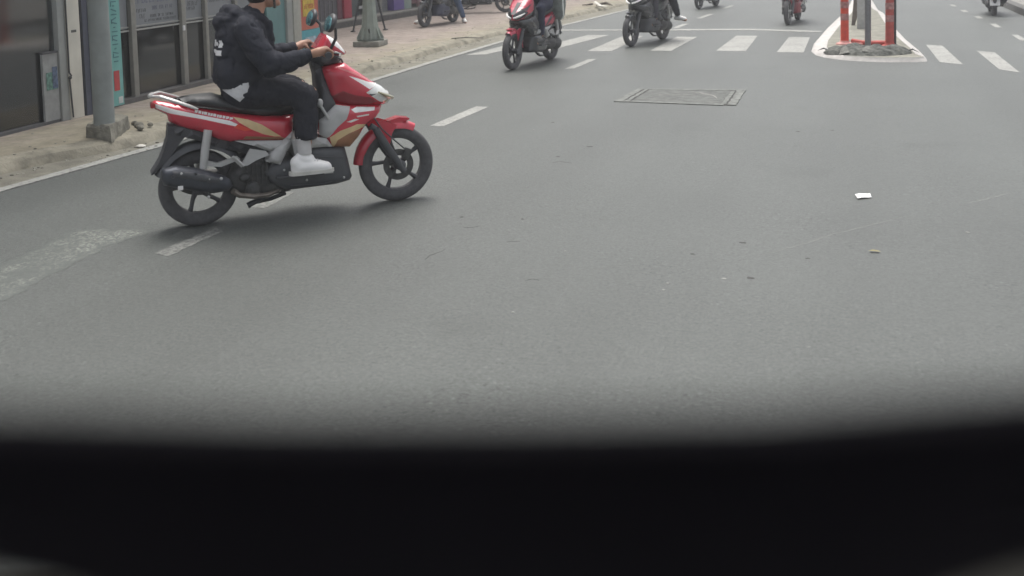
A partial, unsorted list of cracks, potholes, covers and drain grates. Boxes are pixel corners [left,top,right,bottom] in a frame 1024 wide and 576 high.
manhole cover [614,88,746,106]
